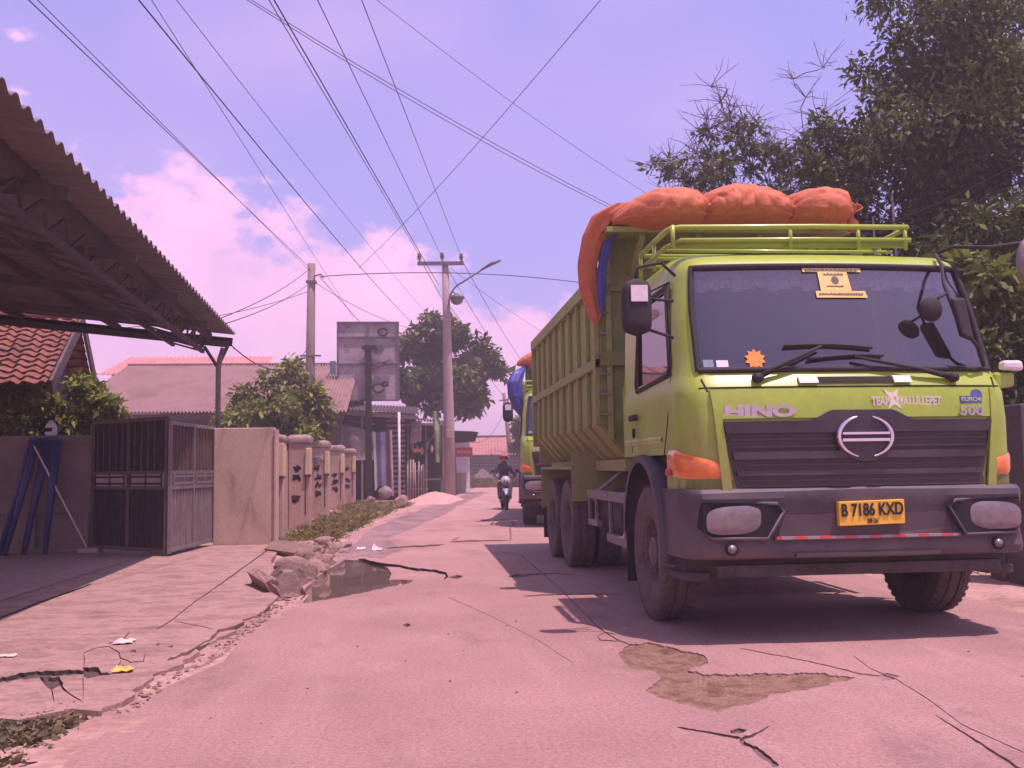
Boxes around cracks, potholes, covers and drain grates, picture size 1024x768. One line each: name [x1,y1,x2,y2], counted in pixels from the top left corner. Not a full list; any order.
pothole [301,560,413,599]
crack [0,551,271,703]
pothole [618,642,855,712]
crack [677,726,779,768]
crack [358,519,629,663]
crack [739,648,1024,768]
